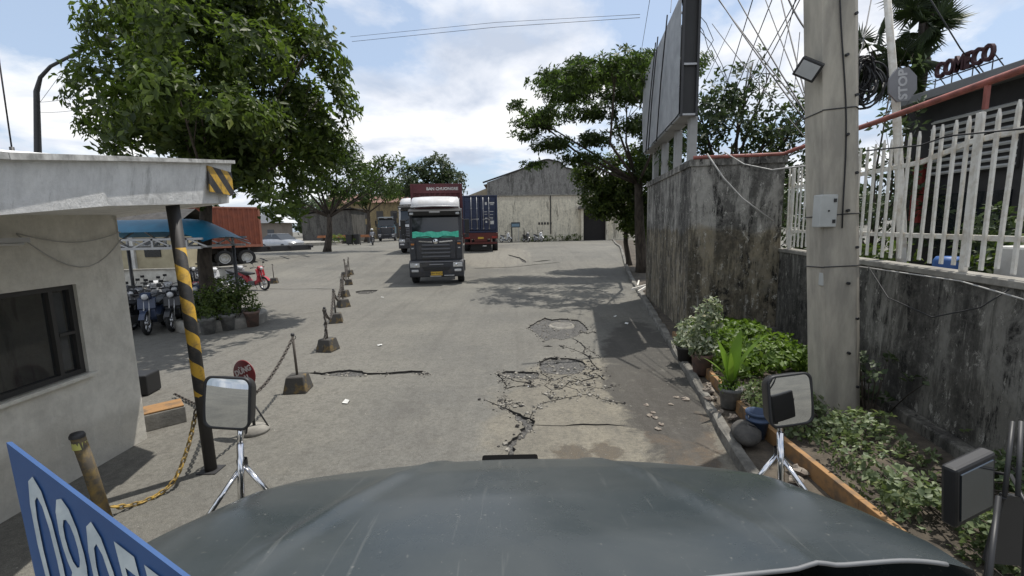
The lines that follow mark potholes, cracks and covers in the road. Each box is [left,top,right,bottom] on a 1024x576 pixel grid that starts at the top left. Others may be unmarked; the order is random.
crack [478,330,631,455]
pothole [533,356,590,376]
crack [493,255,559,268]
pothole [526,317,589,343]
crack [310,369,432,379]
pothole [495,368,544,386]
